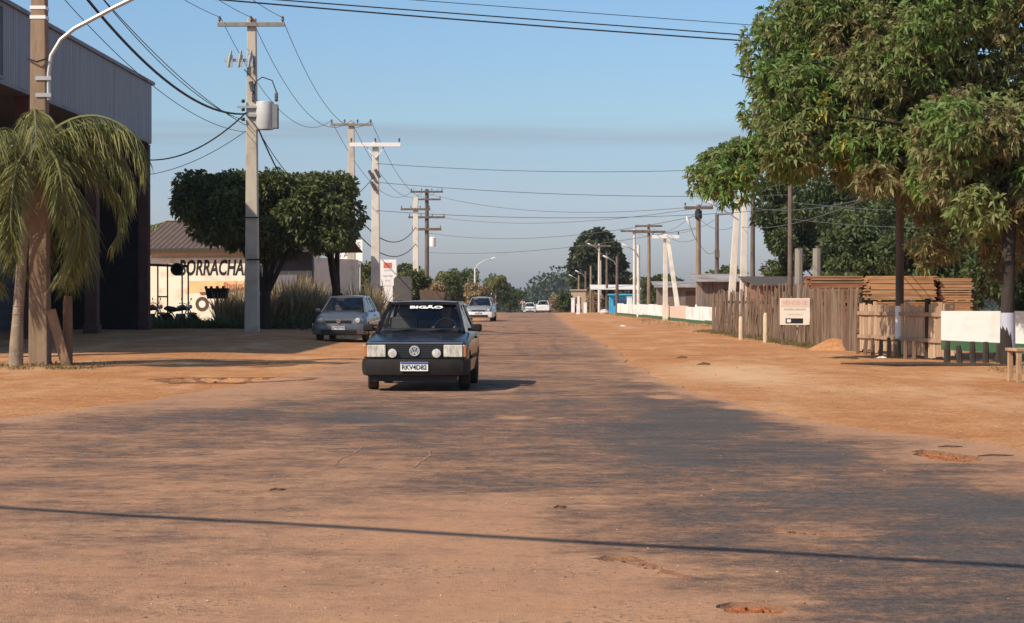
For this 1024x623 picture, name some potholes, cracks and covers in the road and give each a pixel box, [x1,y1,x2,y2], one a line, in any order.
pothole [589,555,692,579]
pothole [911,449,983,462]
pothole [716,602,799,614]
